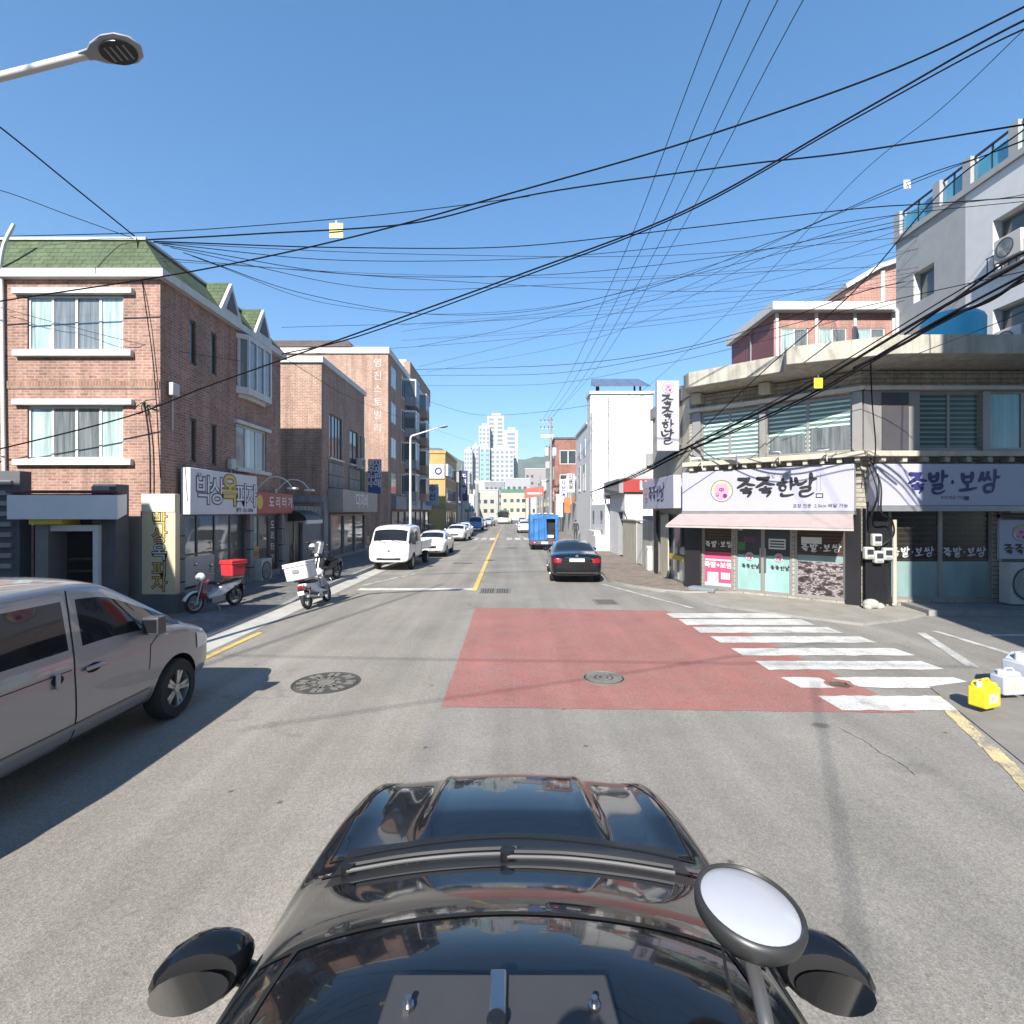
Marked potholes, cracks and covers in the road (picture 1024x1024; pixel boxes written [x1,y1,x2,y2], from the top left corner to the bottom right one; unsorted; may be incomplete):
manhole cover [290,672,361,694]
manhole cover [582,671,626,685]
